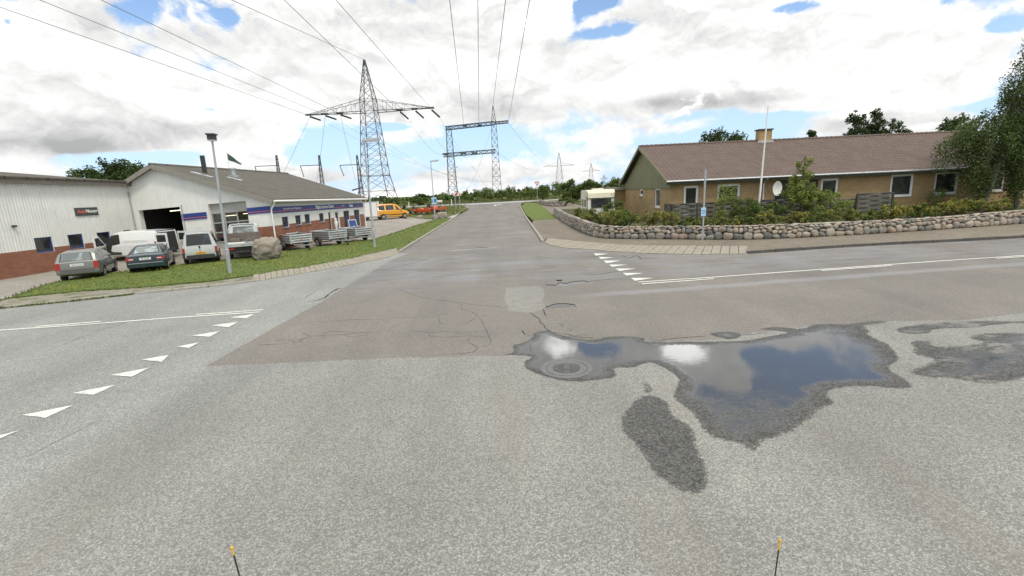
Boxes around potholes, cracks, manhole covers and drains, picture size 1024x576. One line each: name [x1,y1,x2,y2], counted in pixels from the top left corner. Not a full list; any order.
crack [265,290,591,355]
